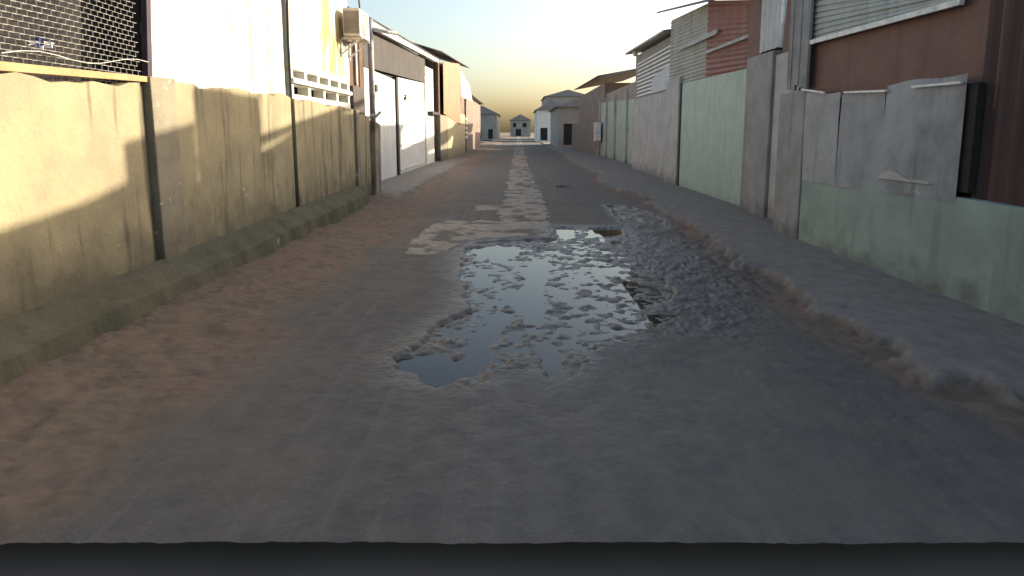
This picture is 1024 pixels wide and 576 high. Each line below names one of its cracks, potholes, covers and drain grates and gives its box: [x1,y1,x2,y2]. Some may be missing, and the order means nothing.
pothole [606,205,672,232]
pothole [383,226,687,389]
